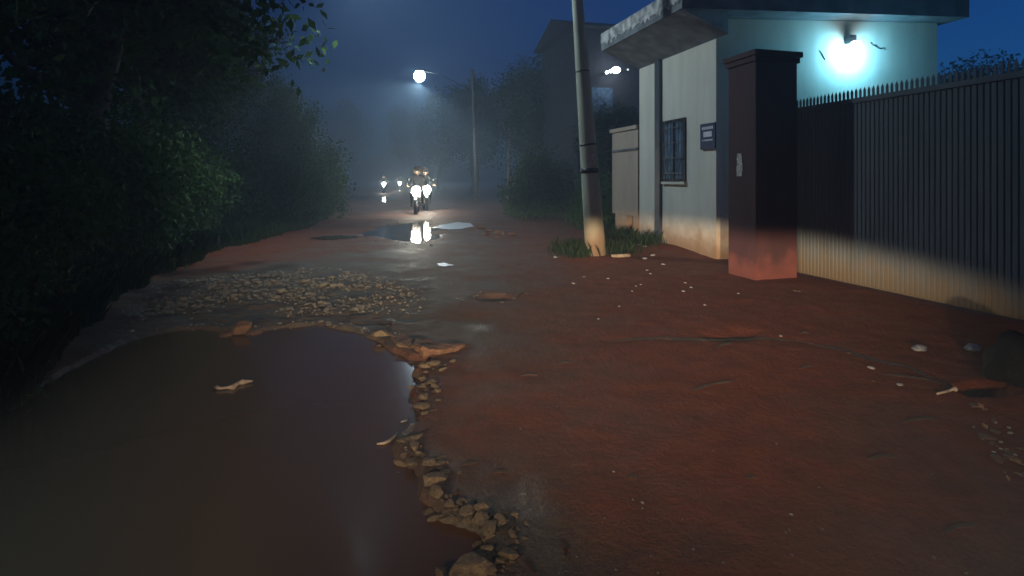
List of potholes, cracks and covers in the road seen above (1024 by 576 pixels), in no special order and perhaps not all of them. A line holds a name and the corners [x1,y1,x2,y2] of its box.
pothole [348,220,447,247]
pothole [0,322,484,576]
crack [693,381,734,391]
crack [609,331,946,385]
